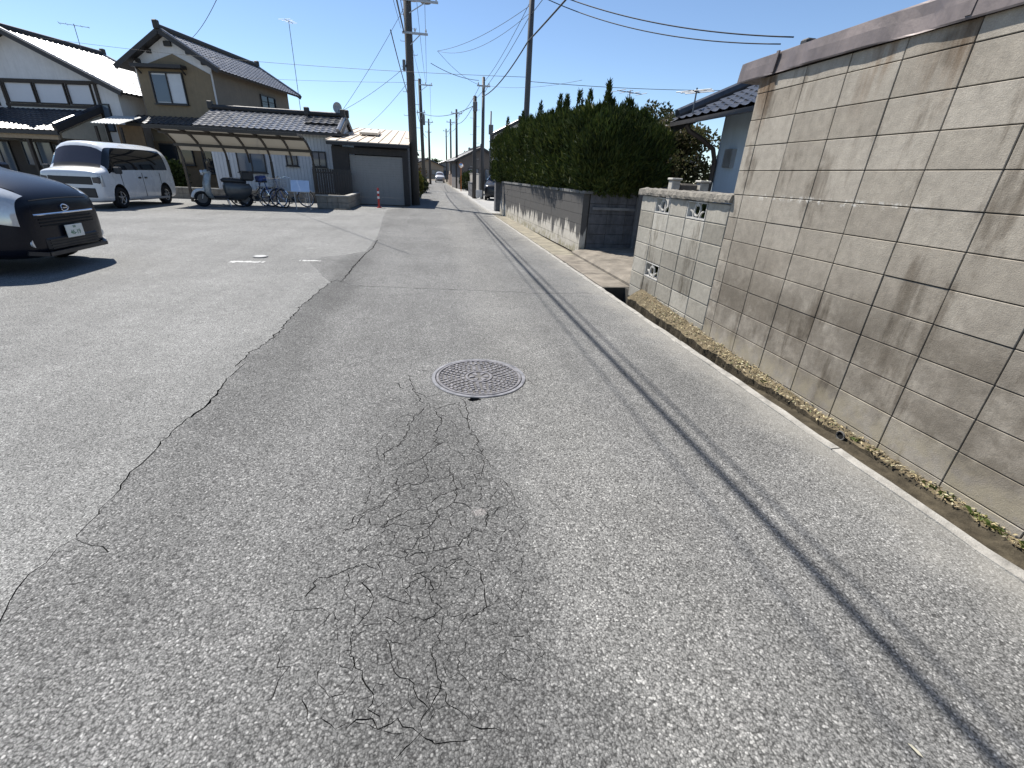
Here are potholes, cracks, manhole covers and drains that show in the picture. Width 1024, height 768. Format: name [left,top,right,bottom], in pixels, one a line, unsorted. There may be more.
crack [0,240,378,622]
crack [272,370,544,760]
manhole cover [432,359,525,398]
